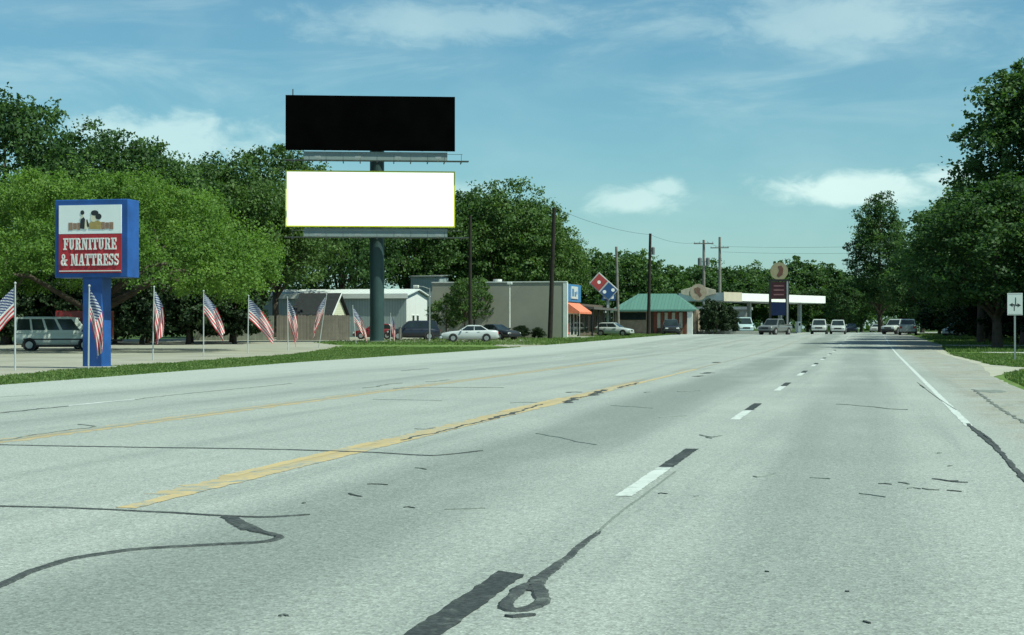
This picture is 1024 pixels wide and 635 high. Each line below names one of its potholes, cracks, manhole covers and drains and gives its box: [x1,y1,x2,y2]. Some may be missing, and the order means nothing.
crack [859,452,968,497]
crack [971,389,1024,423]
crack [535,433,597,445]
